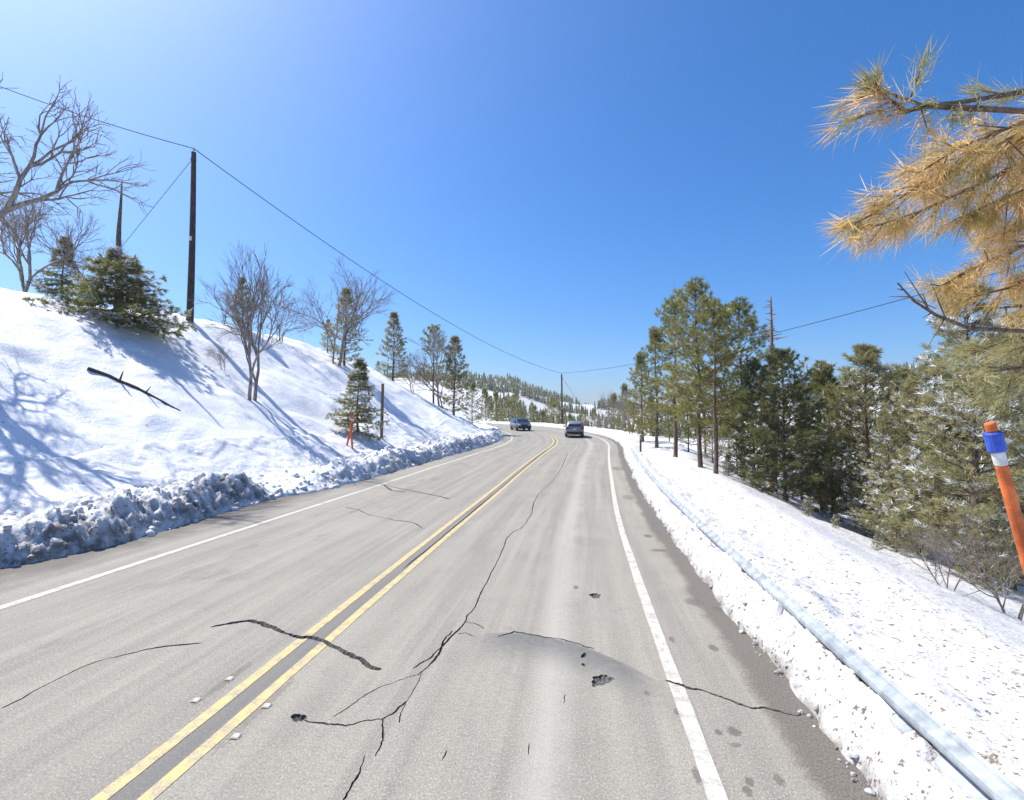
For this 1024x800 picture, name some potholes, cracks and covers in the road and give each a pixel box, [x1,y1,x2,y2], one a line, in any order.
crack [0,619,382,709]
crack [304,456,594,800]
crack [666,680,800,716]
pothole [591,674,615,687]
